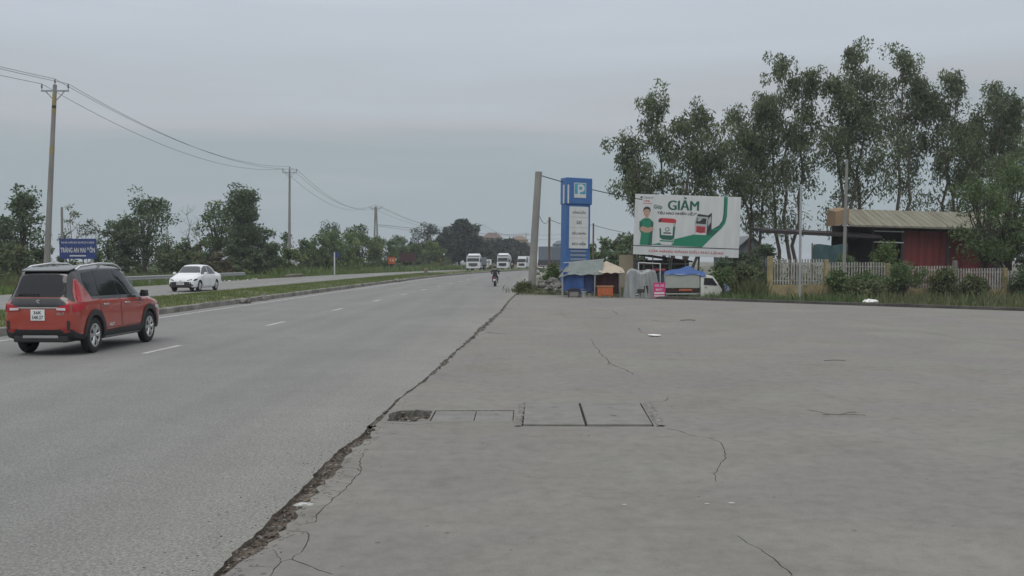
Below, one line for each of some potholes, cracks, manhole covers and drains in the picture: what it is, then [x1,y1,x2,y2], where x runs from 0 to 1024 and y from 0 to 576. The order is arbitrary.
manhole cover [580,402,652,426]
manhole cover [523,402,585,426]
crack [213,423,415,576]
pothole [387,410,433,424]
